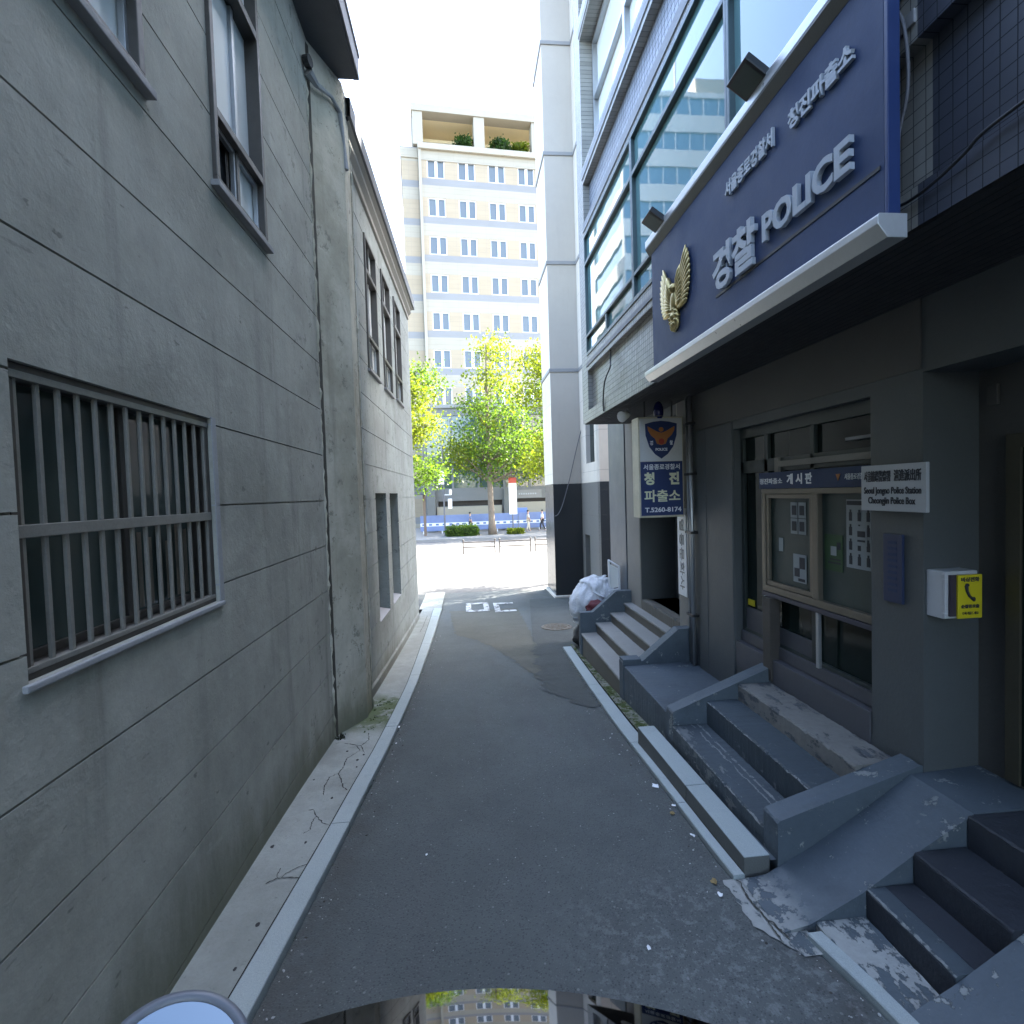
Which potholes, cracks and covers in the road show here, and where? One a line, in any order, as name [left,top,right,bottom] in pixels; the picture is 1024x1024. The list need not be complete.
crack [304,715,385,833]
